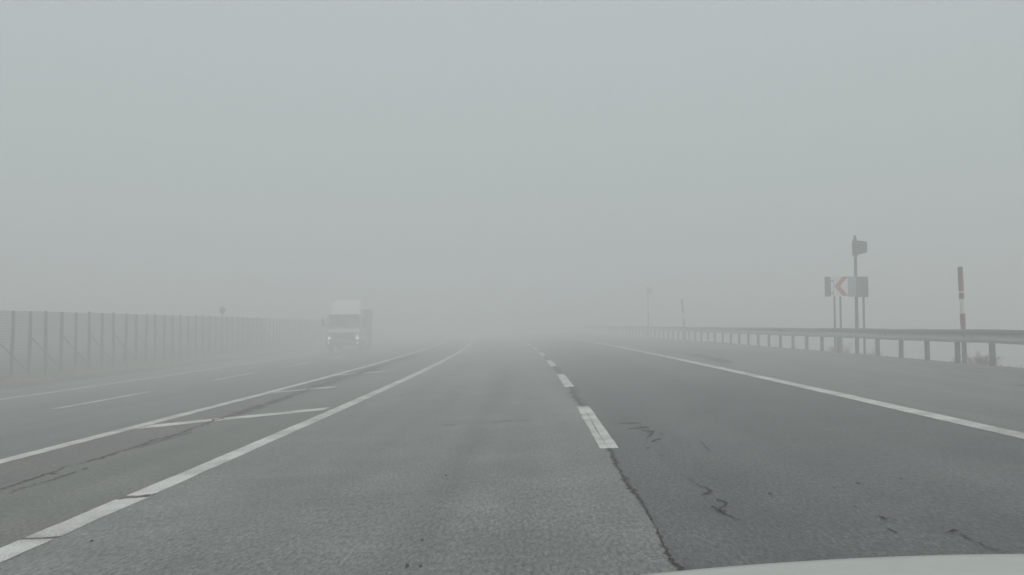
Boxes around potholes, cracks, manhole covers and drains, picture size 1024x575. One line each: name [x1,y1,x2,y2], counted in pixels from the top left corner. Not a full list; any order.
crack [1,426,198,493]
crack [582,406,685,571]
crack [947,529,1007,552]
crack [687,477,743,521]
